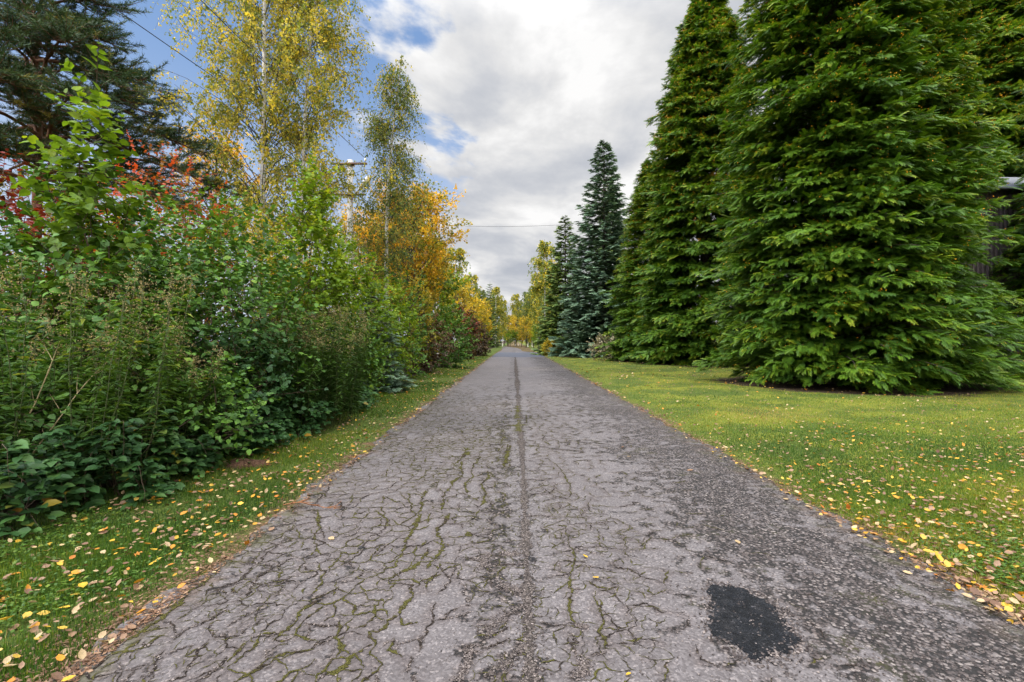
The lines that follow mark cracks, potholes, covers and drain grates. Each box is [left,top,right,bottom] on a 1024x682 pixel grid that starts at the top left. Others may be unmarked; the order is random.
crack [55,384,823,682]
